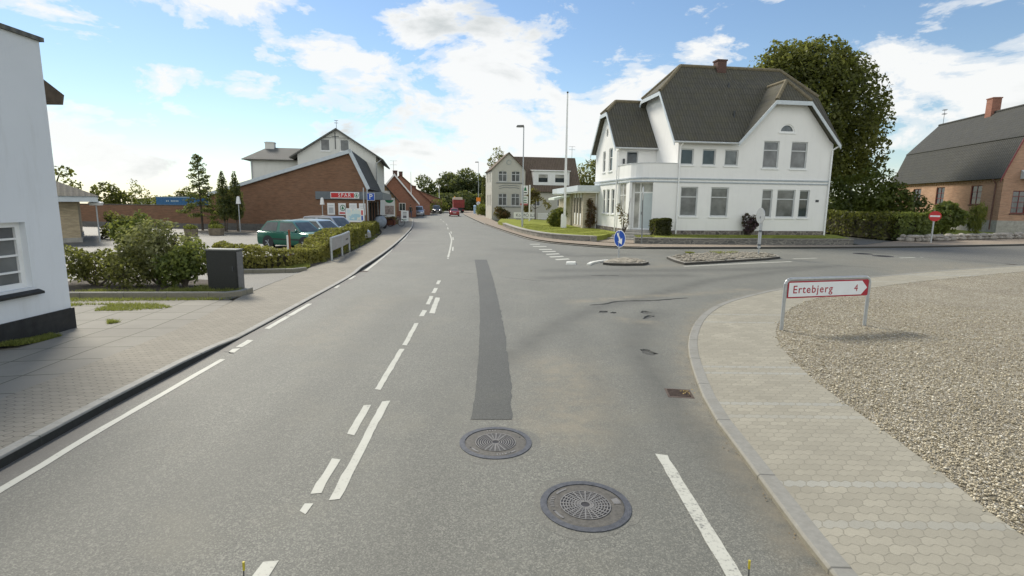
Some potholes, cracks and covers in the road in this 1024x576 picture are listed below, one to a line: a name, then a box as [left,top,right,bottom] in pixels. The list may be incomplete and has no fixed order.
drain grate [664,388,695,399]
manhole cover [534,477,644,540]
manhole cover [455,425,541,465]
